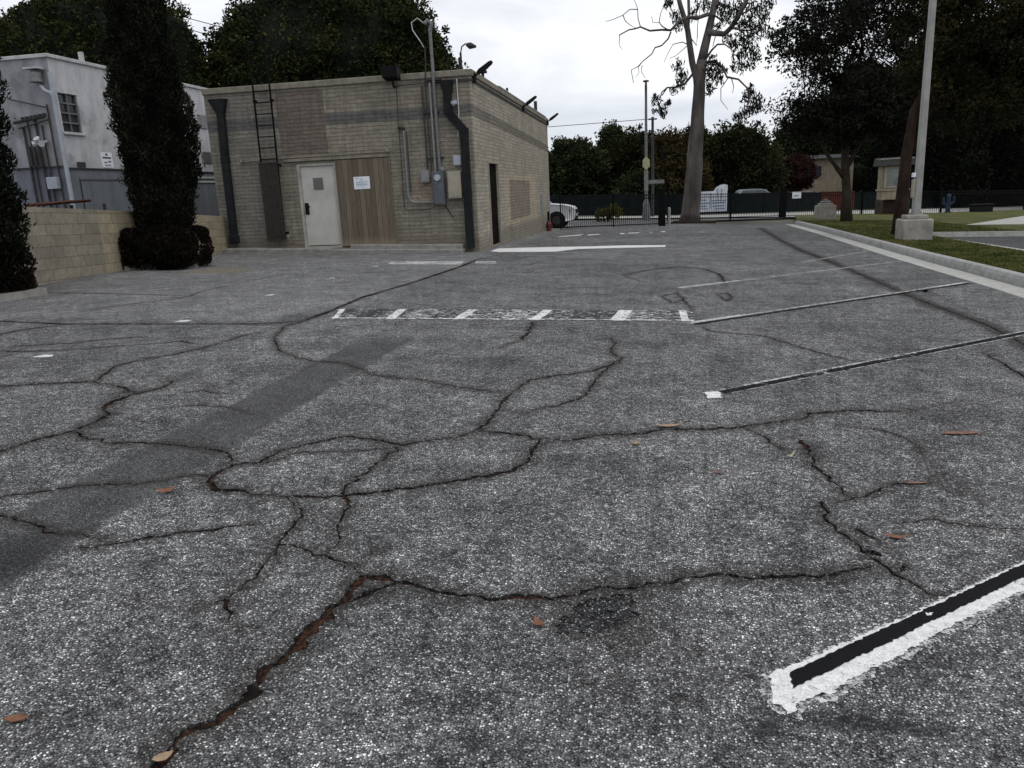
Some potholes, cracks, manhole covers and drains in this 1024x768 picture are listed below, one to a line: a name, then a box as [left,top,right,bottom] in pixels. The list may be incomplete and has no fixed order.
crack [902,518,1024,530]
crack [625,266,732,301]
crack [0,321,946,768]
